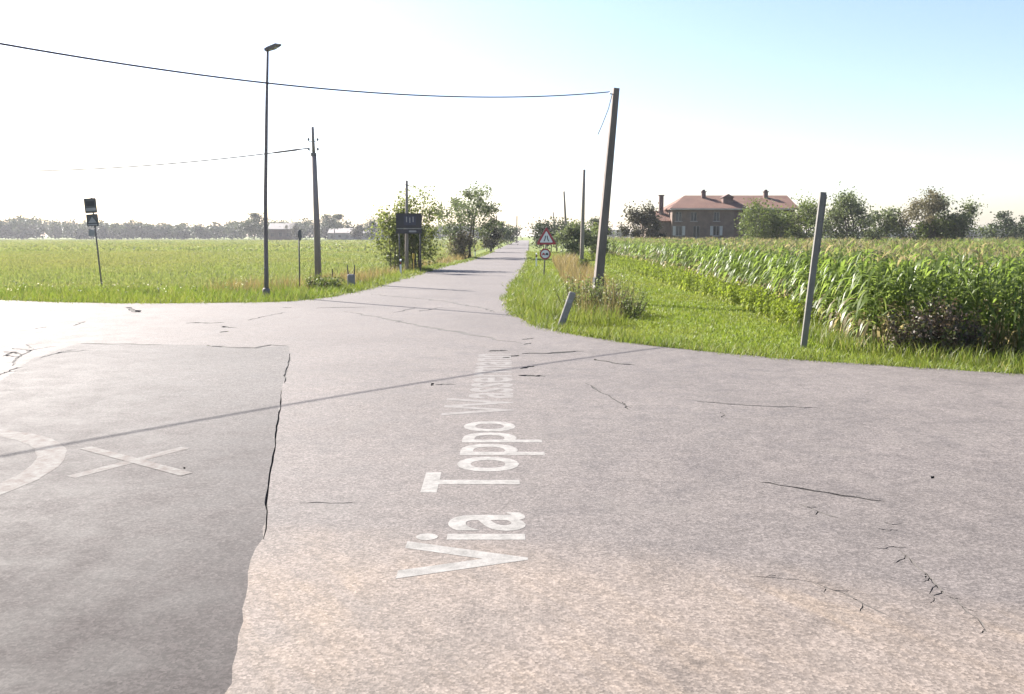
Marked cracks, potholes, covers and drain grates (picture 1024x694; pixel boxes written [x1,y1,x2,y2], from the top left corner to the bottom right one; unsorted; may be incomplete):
crack [697,401,816,419]
crack [195,322,285,348]
crack [324,294,576,377]
crack [588,384,631,409]
crack [0,327,161,375]
crack [753,482,987,633]
